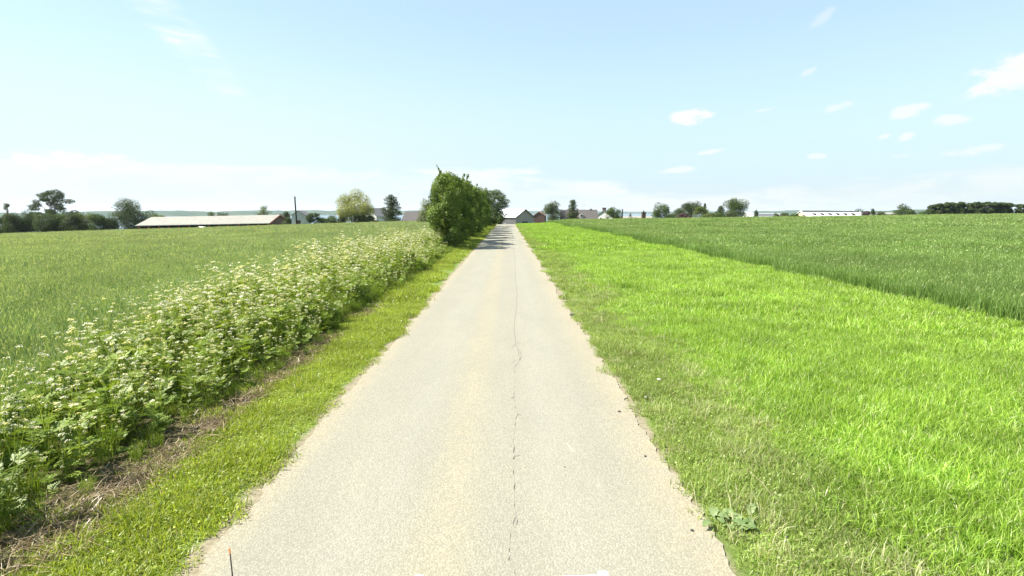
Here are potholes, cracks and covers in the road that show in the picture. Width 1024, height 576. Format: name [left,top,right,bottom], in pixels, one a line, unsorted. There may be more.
crack [508,229,522,576]
